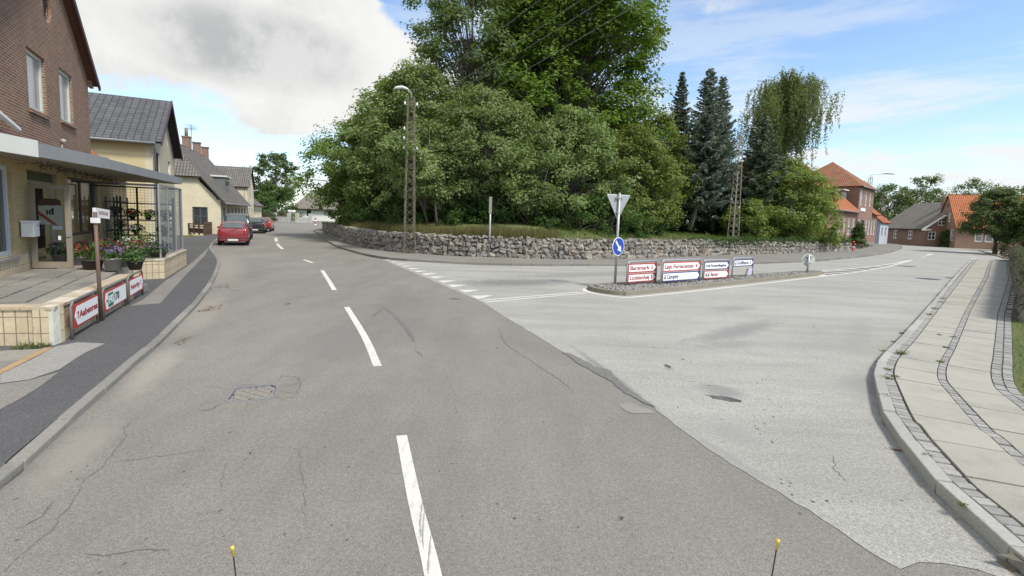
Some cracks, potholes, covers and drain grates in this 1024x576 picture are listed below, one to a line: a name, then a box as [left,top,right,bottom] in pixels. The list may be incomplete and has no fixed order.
pothole [704,394,742,402]
crack [0,418,207,575]
crack [282,444,307,520]
manhole cover [225,384,279,403]
